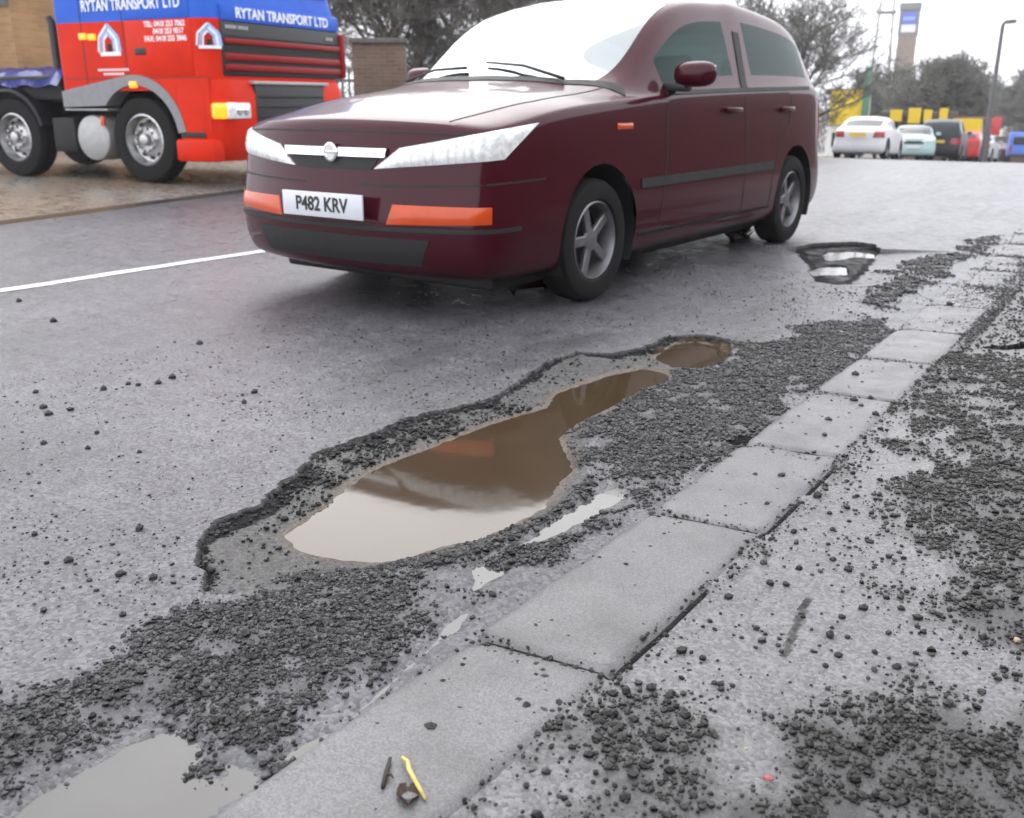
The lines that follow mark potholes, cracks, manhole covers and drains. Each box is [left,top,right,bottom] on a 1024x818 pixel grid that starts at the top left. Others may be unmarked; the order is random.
crack [983,343,1024,351]
pothole [193,334,734,595]
crack [779,598,813,658]
pothole [793,241,881,285]
